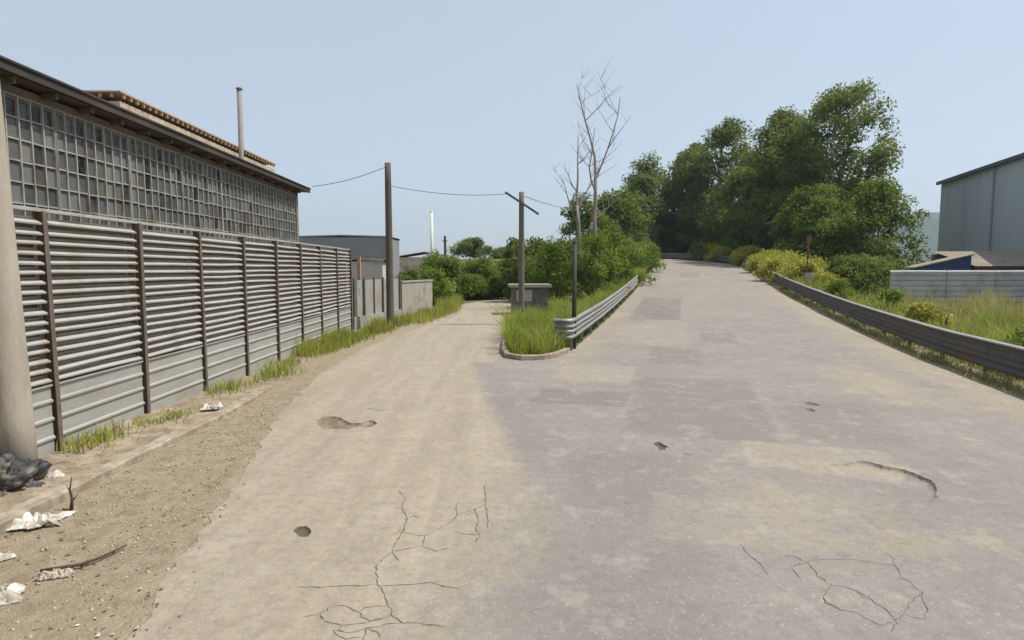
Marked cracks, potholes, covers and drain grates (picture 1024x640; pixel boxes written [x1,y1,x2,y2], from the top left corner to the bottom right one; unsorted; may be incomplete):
pothole [294,526,311,537]
crack [301,485,489,640]
crack [784,554,929,633]
pothole [317,416,377,429]
